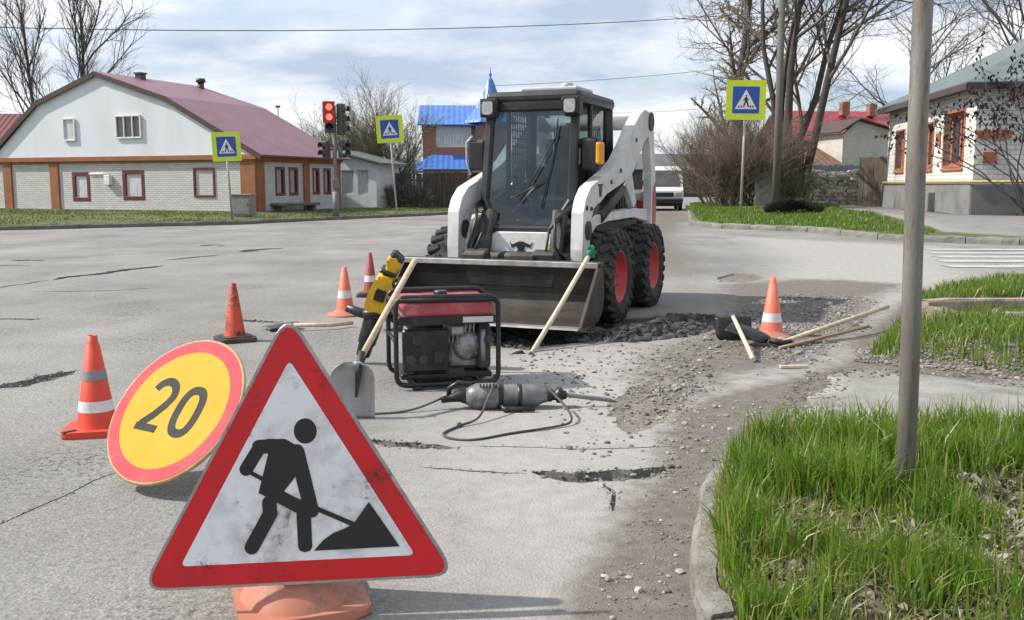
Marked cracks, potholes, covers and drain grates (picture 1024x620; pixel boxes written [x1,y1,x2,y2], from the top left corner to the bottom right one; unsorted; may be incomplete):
pothole [491,324,615,349]
crack [0,255,216,292]
crack [603,484,616,512]
